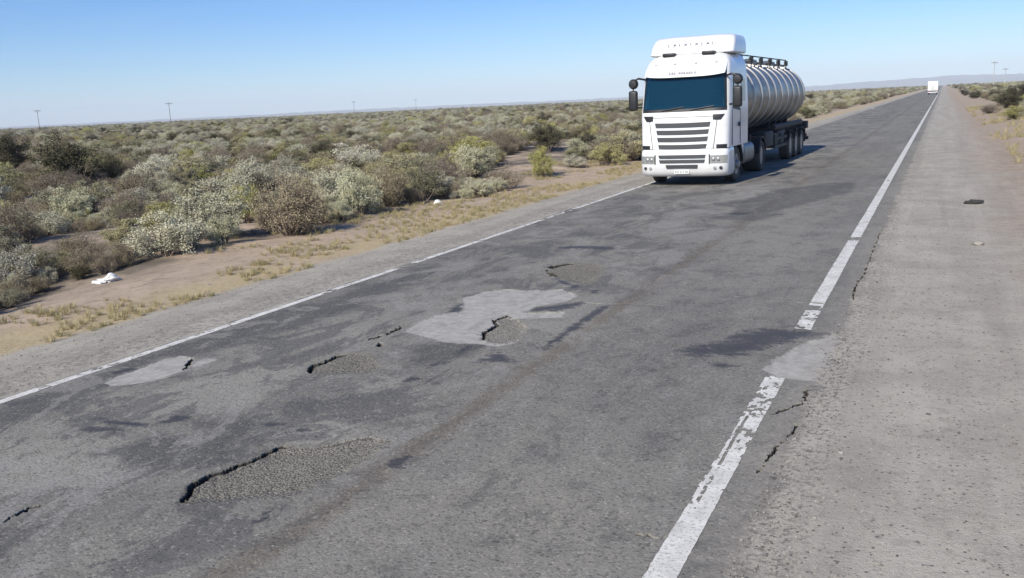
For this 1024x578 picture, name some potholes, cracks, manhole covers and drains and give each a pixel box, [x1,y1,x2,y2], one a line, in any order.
crack [360,323,410,346]
pothole [473,314,536,346]
crack [763,226,886,306]
crack [0,498,58,528]
pothole [165,433,406,509]
crack [745,385,818,483]
crack [175,355,204,373]
pothole [296,350,393,378]
pothole [540,262,610,287]
